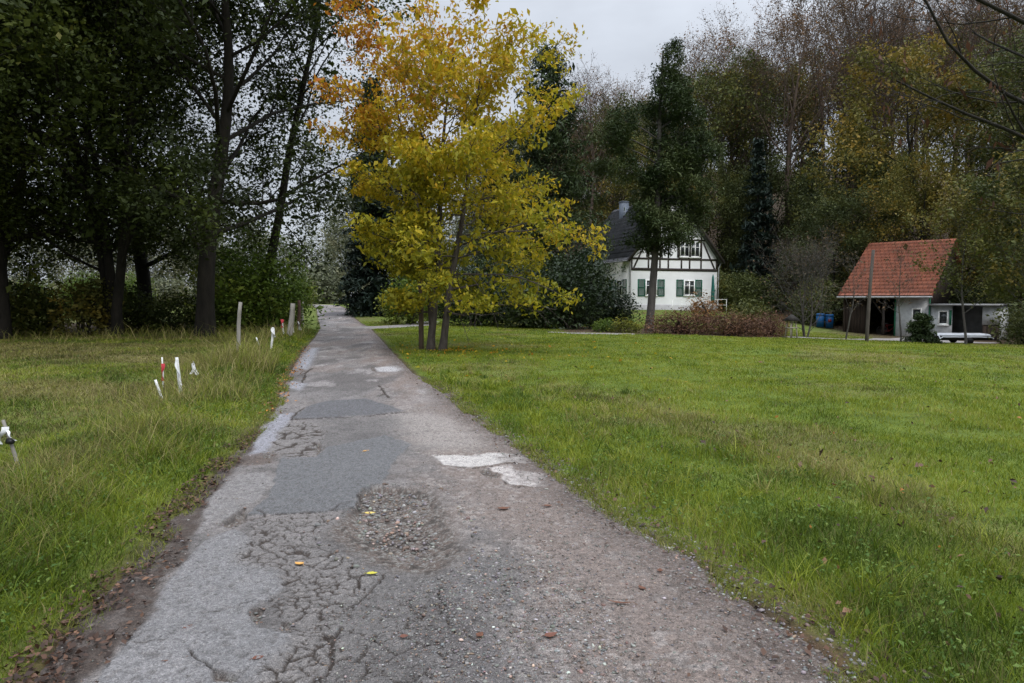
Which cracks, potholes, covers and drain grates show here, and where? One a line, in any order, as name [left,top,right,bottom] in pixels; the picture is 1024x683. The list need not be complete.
pothole [311,483,479,582]
crack [376,385,390,398]
crack [208,514,481,683]
crack [272,421,328,459]
